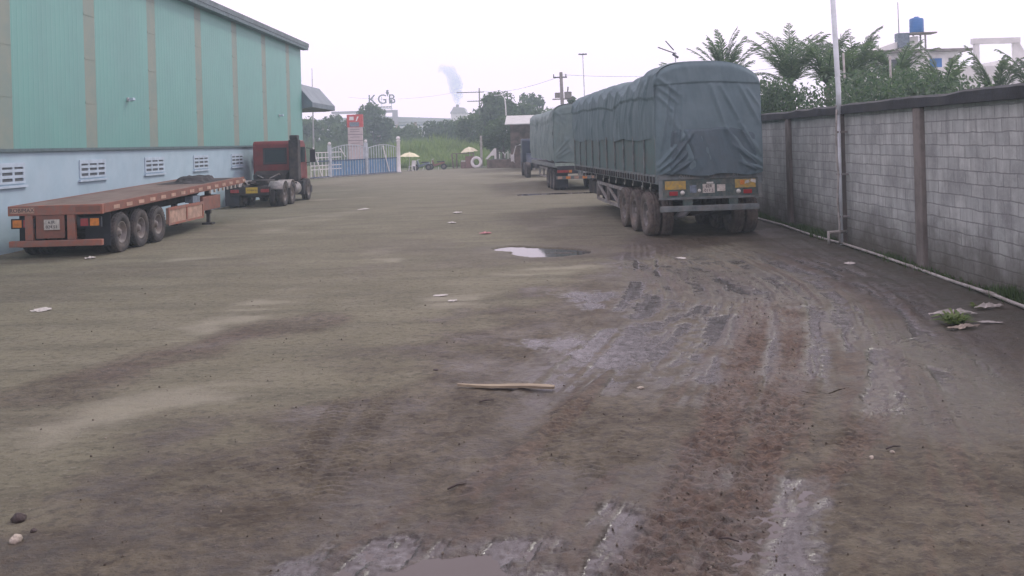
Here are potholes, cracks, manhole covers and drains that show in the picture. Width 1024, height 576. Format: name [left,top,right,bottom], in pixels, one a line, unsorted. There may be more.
pothole [475,244,609,260]
